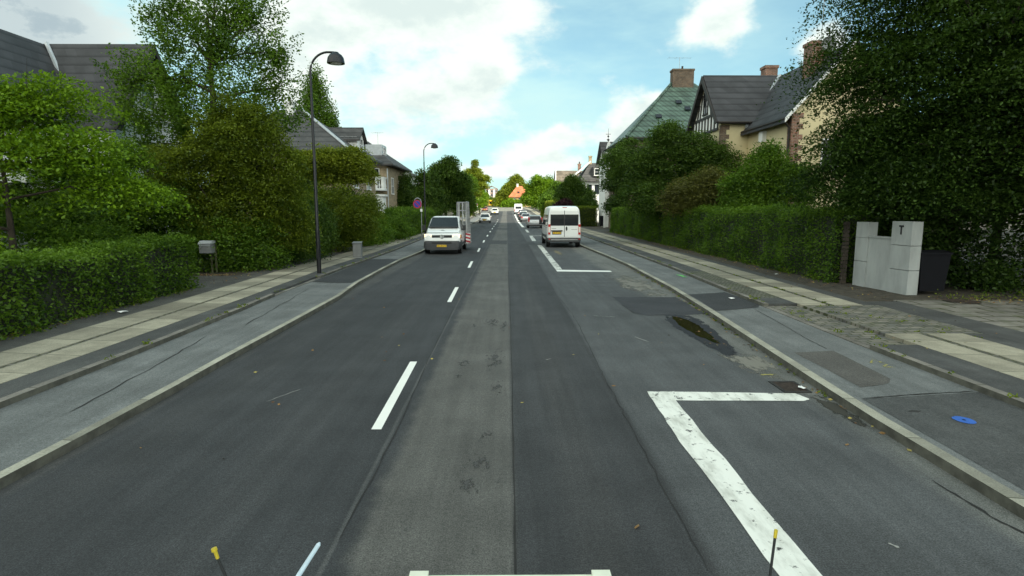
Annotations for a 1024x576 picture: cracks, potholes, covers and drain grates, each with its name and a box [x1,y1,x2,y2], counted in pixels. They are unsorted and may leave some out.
pothole [665,315,737,356]
crack [933,480,1024,533]
crack [70,336,206,412]
